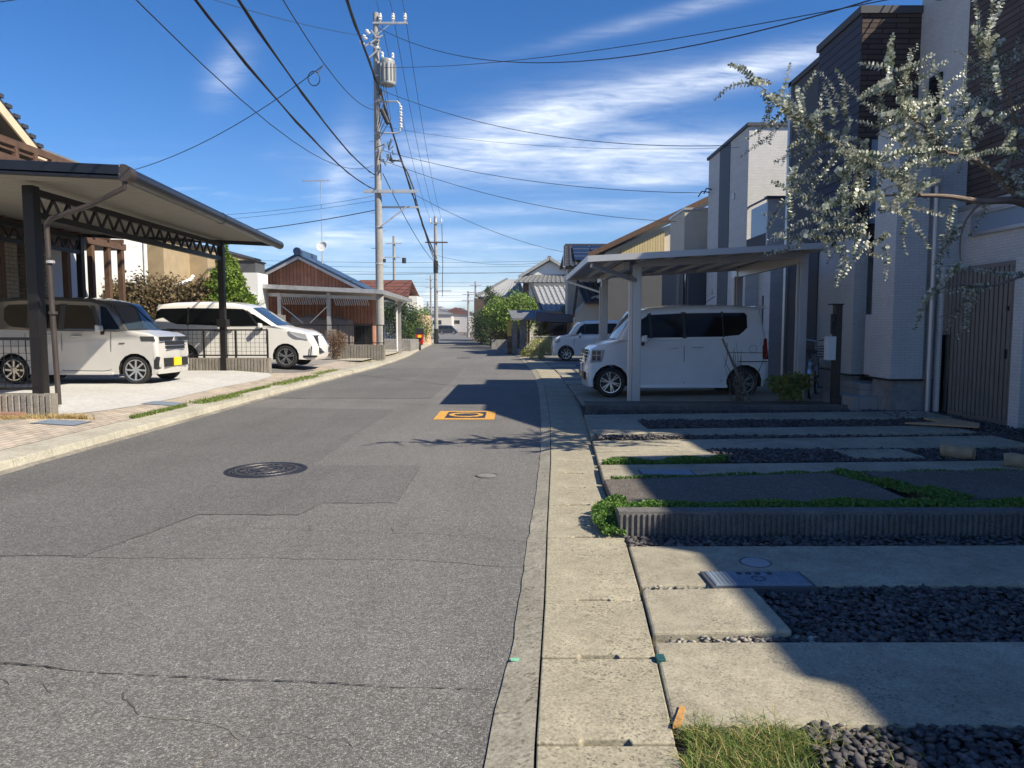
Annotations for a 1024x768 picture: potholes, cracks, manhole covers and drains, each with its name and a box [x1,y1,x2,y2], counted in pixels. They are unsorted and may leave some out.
manhole cover [223,462,308,478]
crack [122,692,364,768]
crack [0,661,494,694]
